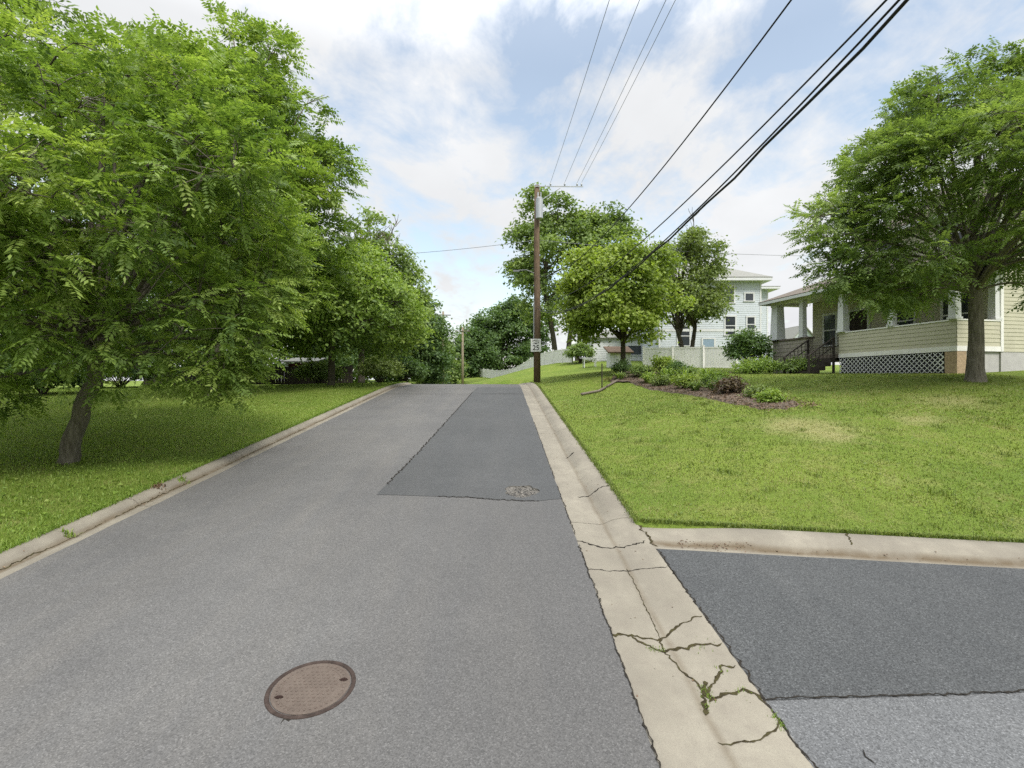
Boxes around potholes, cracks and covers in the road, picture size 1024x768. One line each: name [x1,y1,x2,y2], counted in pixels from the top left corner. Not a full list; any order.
manhole cover [264,660,356,720]
crack [533,421,819,768]
pothole [505,485,540,498]
